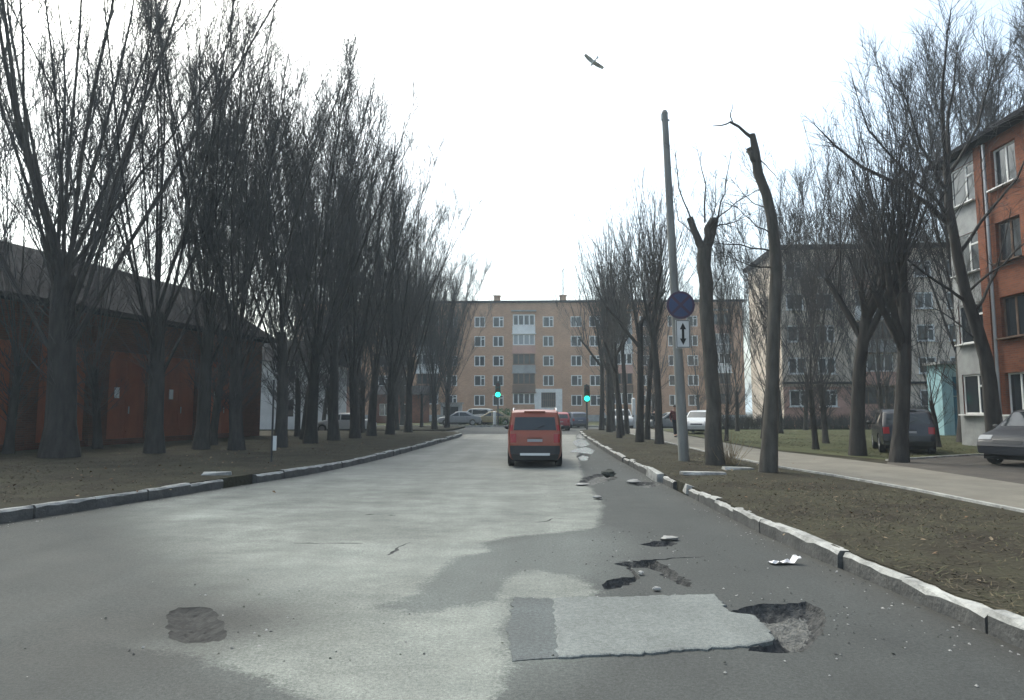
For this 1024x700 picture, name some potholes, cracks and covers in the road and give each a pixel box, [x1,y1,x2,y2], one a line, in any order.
pothole [579,474,617,485]
pothole [730,601,826,653]
